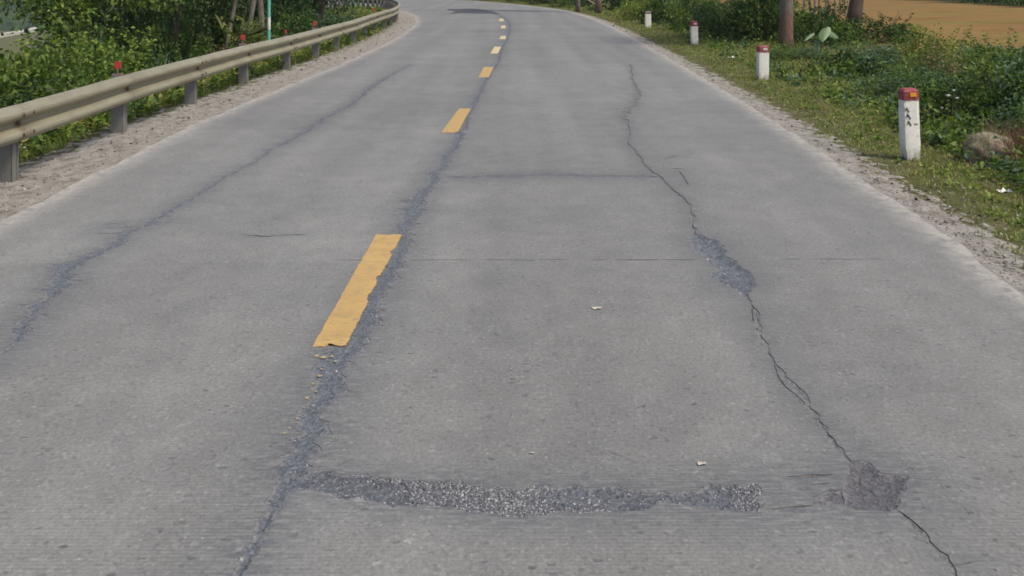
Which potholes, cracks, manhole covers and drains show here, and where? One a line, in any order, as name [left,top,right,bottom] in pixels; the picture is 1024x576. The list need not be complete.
crack [893,509,976,576]
crack [619,65,851,510]
crack [0,64,411,358]
